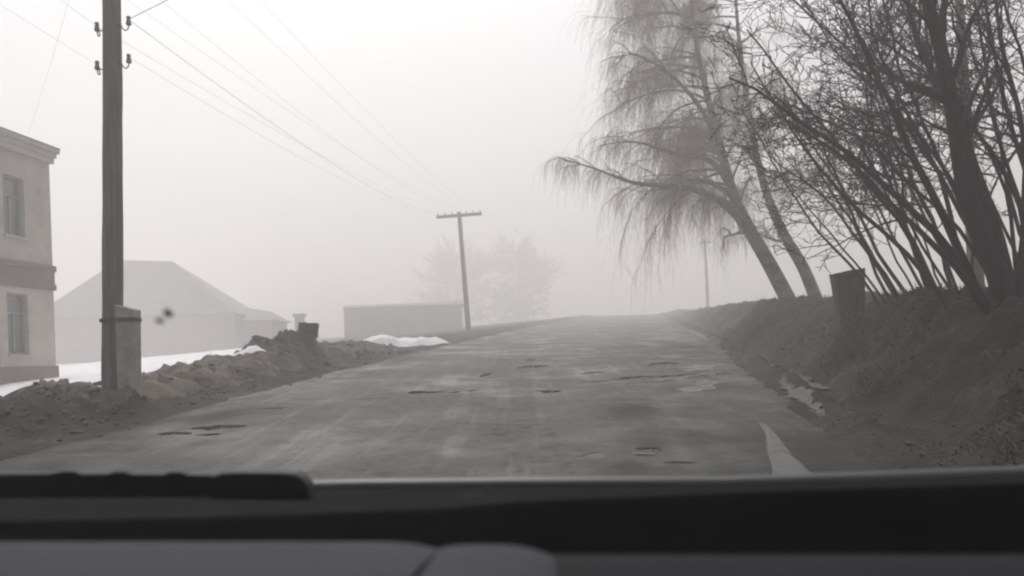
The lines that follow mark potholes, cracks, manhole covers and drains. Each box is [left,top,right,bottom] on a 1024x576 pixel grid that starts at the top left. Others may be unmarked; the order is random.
crack [581,373,699,383]
